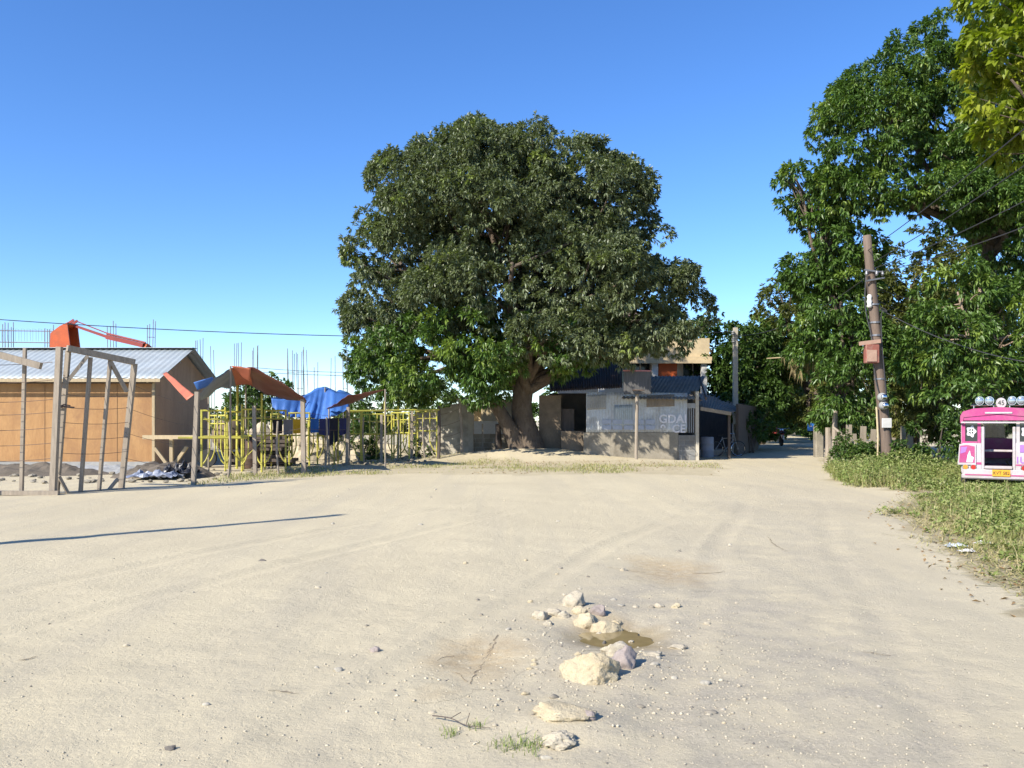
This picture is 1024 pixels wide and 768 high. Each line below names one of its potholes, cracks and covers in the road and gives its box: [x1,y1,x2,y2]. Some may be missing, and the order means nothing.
crack [437,634,498,684]
pothole [549,607,691,656]
